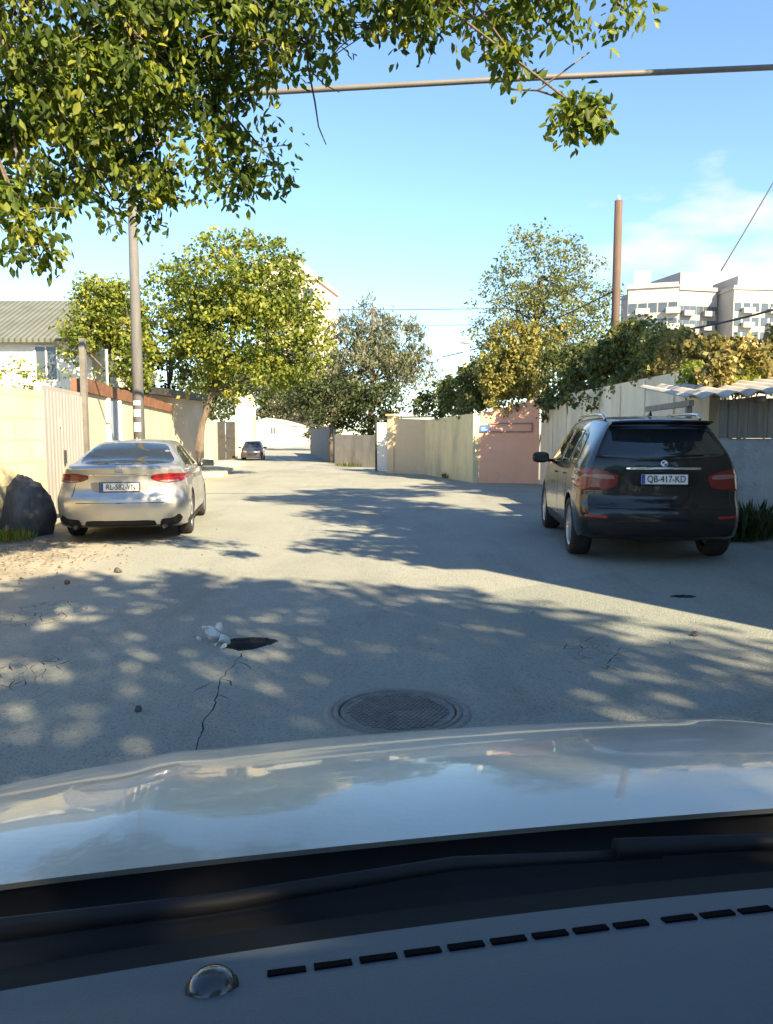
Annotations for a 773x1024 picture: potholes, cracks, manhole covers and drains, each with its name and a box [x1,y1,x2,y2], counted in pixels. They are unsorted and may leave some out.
crack [0,654,70,692]
pothole [220,637,278,651]
crack [0,600,87,626]
crack [191,652,253,750]
crack [564,637,631,671]
manhole cover [324,688,472,735]
